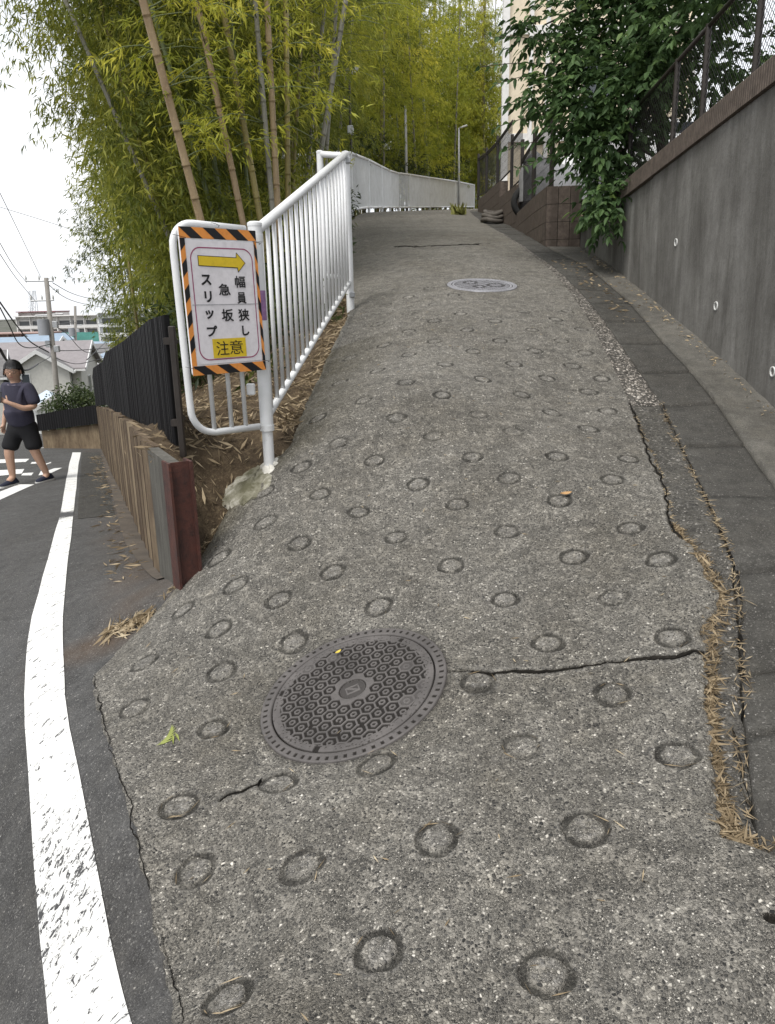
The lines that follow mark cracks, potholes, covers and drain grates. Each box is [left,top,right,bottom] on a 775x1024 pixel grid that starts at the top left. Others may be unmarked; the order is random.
crack [93,676,184,1023]
crack [448,649,704,677]
crack [220,778,262,802]
crack [629,403,751,816]
manhole cover [260,628,448,764]
manhole cover [447,278,517,292]
